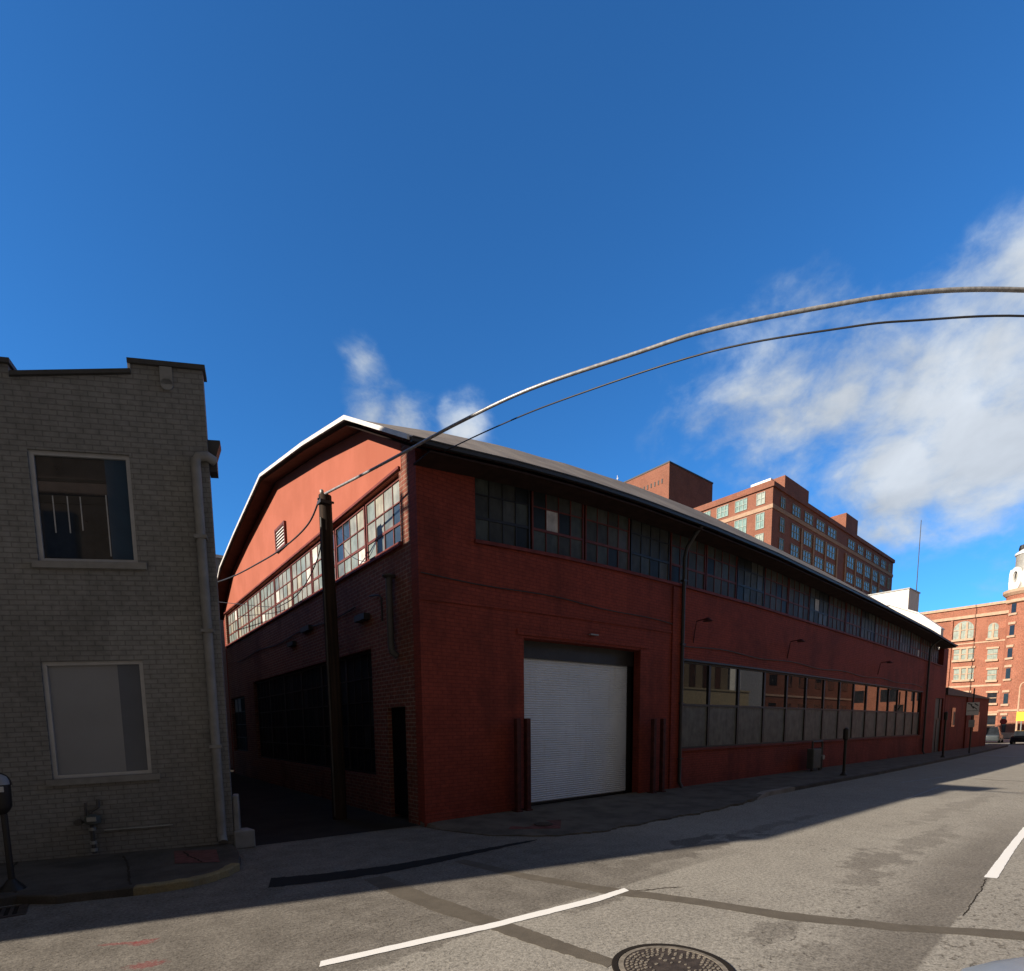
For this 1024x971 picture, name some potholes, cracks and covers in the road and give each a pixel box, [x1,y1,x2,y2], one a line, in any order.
drain grate [0,903,29,919]
manhole cover [612,943,735,971]
